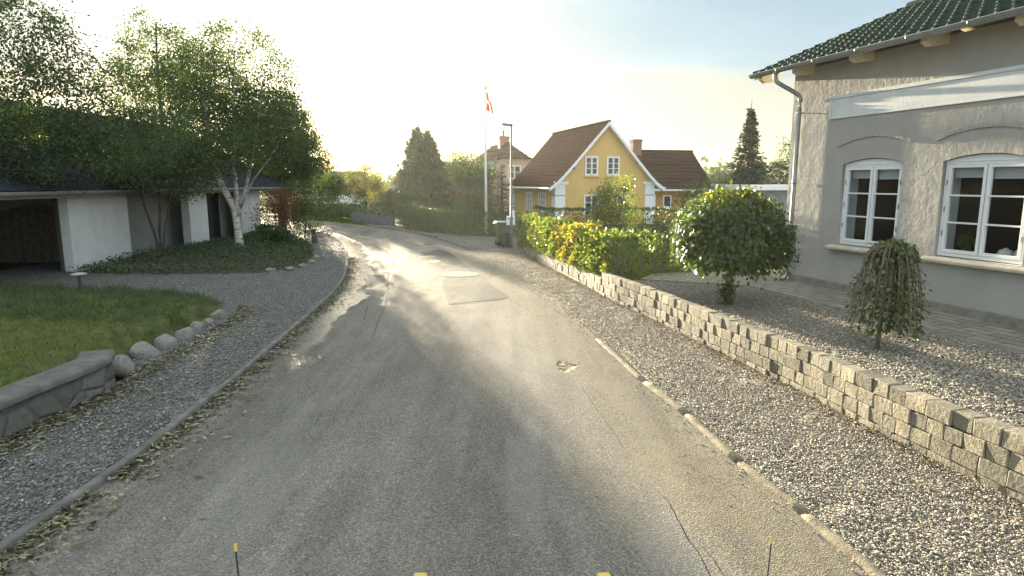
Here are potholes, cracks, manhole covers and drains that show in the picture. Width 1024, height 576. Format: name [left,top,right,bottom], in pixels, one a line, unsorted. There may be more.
pothole [555,361,578,372]
